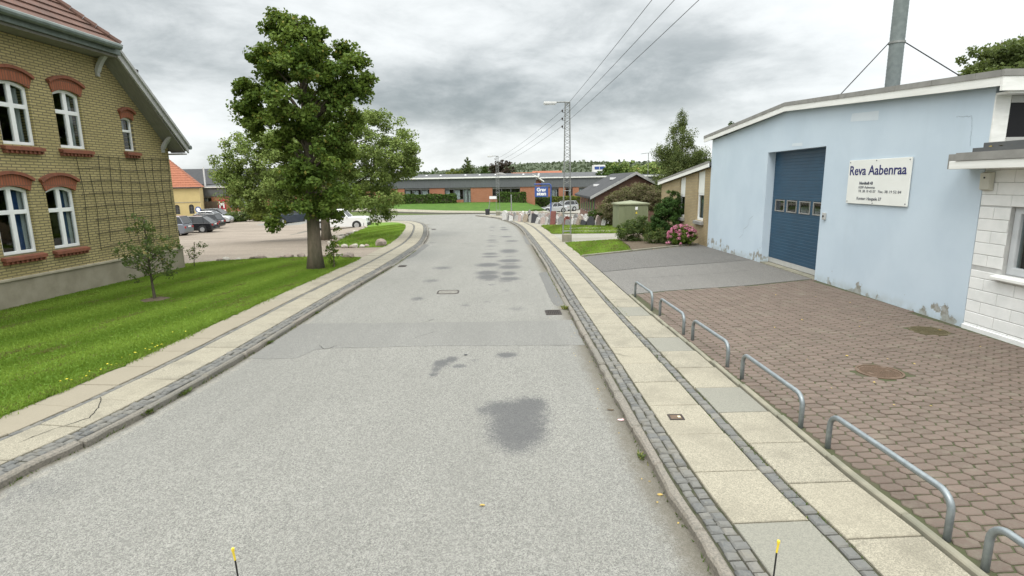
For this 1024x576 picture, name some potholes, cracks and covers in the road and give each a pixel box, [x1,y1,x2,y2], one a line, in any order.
manhole cover [908,326,951,336]
manhole cover [855,364,905,380]
